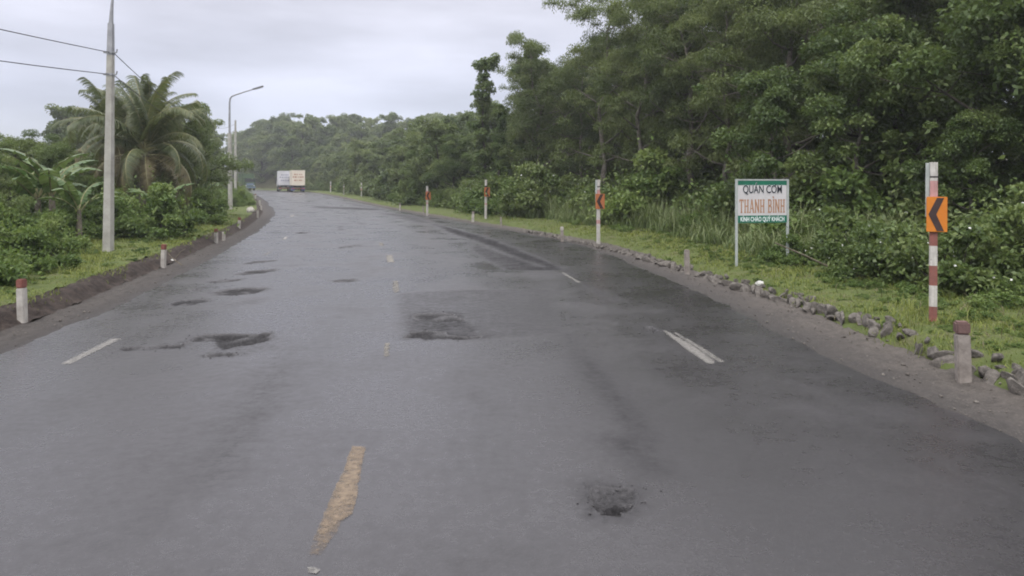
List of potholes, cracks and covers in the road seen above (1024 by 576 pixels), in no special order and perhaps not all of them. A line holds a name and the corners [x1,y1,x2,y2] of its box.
pothole [588,485,638,517]
pothole [412,312,467,322]
pothole [213,287,267,296]
pothole [403,330,483,340]
pothole [119,341,190,351]
pothole [191,333,273,350]
